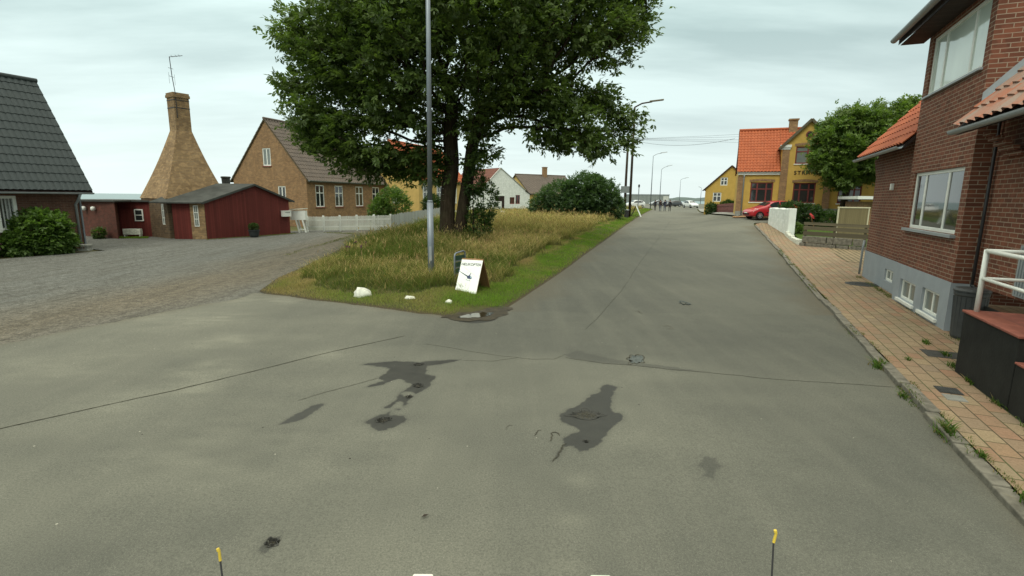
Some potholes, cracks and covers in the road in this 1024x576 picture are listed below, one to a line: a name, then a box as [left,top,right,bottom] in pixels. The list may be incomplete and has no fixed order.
utility cover [933,385,964,395]
pothole [264,536,279,547]
pothole [626,354,645,365]
